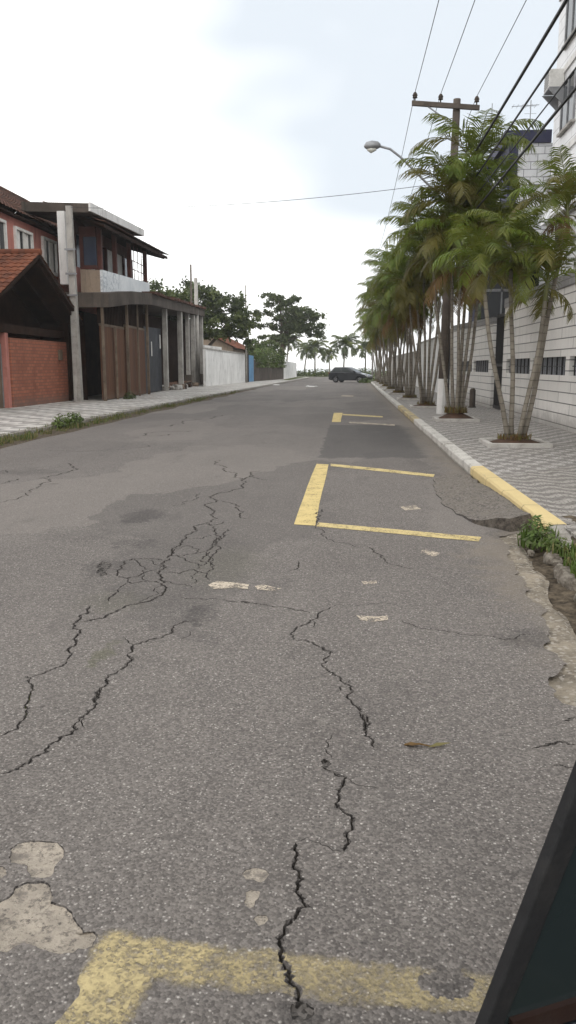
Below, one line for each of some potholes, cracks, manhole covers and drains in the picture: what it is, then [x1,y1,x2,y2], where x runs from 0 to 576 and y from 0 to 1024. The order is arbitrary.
pothole [9,840,64,878]
crack [1,460,530,1003]
pothole [0,881,98,954]
